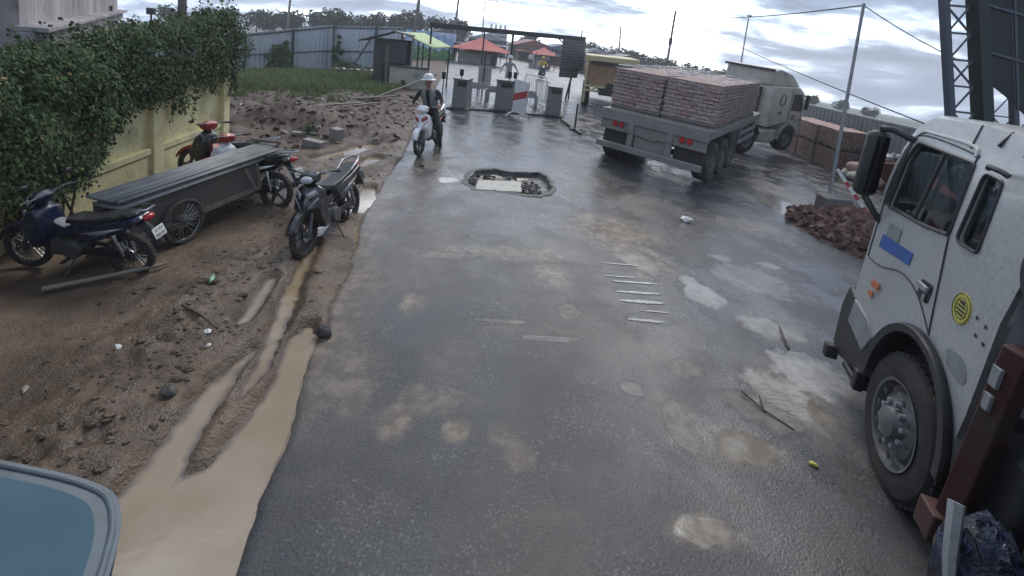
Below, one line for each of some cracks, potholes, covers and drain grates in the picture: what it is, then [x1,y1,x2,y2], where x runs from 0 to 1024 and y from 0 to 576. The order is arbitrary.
pothole [461,168,557,197]
